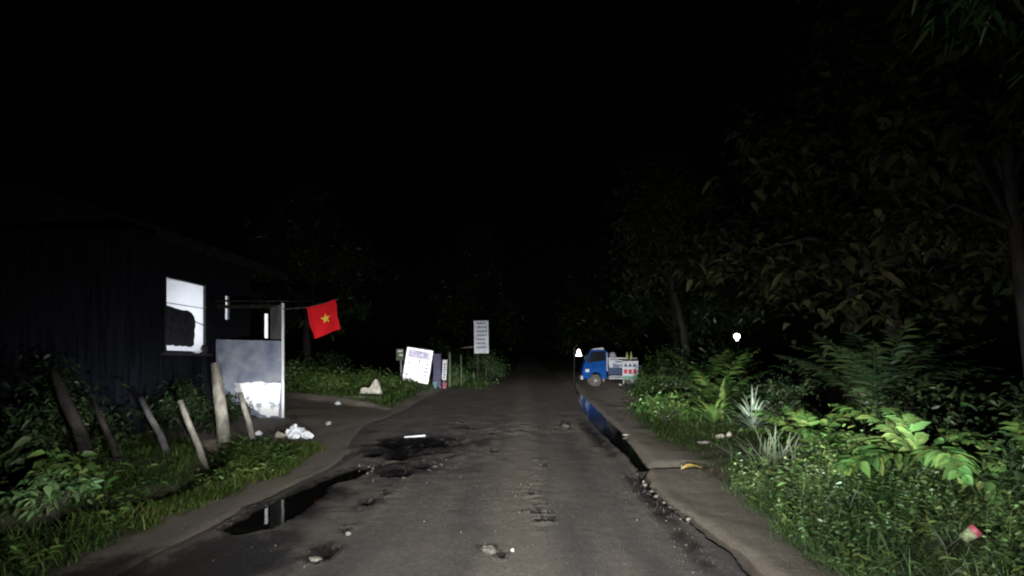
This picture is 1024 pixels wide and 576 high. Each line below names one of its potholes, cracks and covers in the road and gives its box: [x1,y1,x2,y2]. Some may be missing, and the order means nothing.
pothole [360,449,392,459]
pothole [374,469,418,479]
pothole [294,544,351,566]
pothole [355,497,379,507]
pothole [411,462,439,470]
pothole [488,549,514,562]
pothole [208,465,374,538]
pothole [376,437,449,463]
